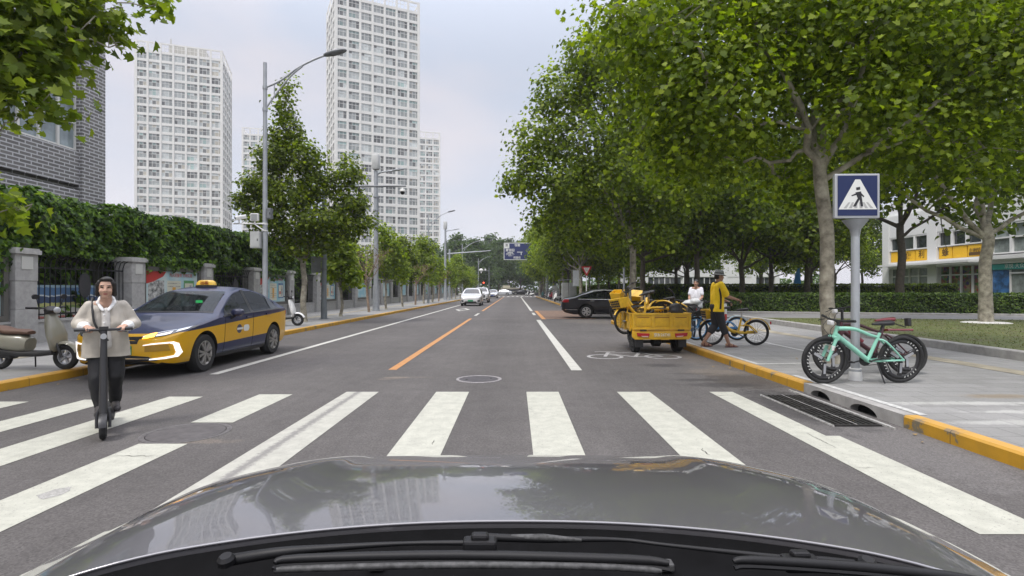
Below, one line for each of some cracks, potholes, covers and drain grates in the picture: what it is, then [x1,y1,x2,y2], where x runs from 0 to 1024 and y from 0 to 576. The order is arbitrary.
manhole cover [138,423,232,444]
manhole cover [456,375,502,383]
drain grate [760,389,896,430]
